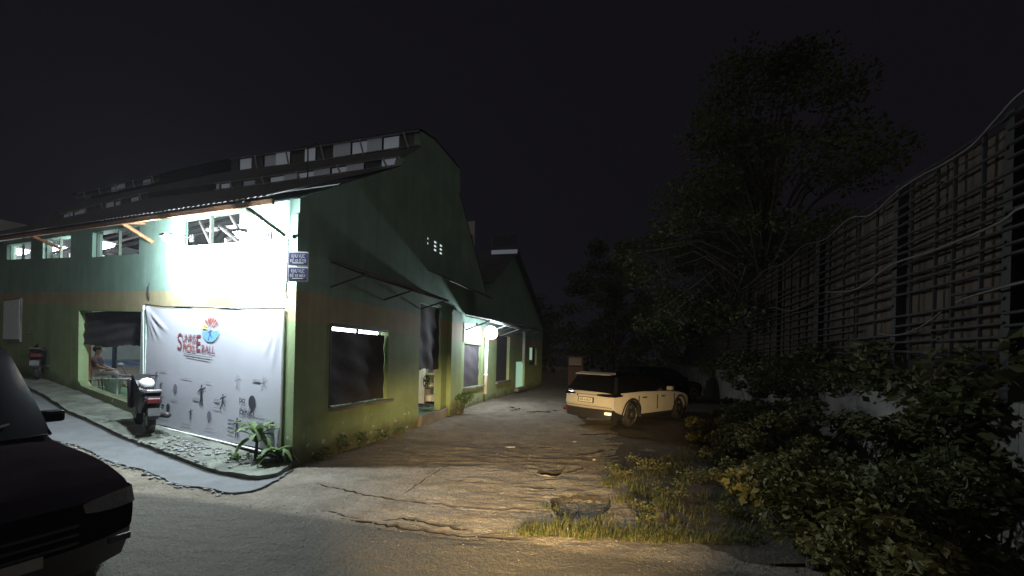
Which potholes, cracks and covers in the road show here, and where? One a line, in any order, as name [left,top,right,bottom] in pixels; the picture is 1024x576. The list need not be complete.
pothole [548,494,614,521]
crack [320,509,531,545]
crack [401,464,473,495]
